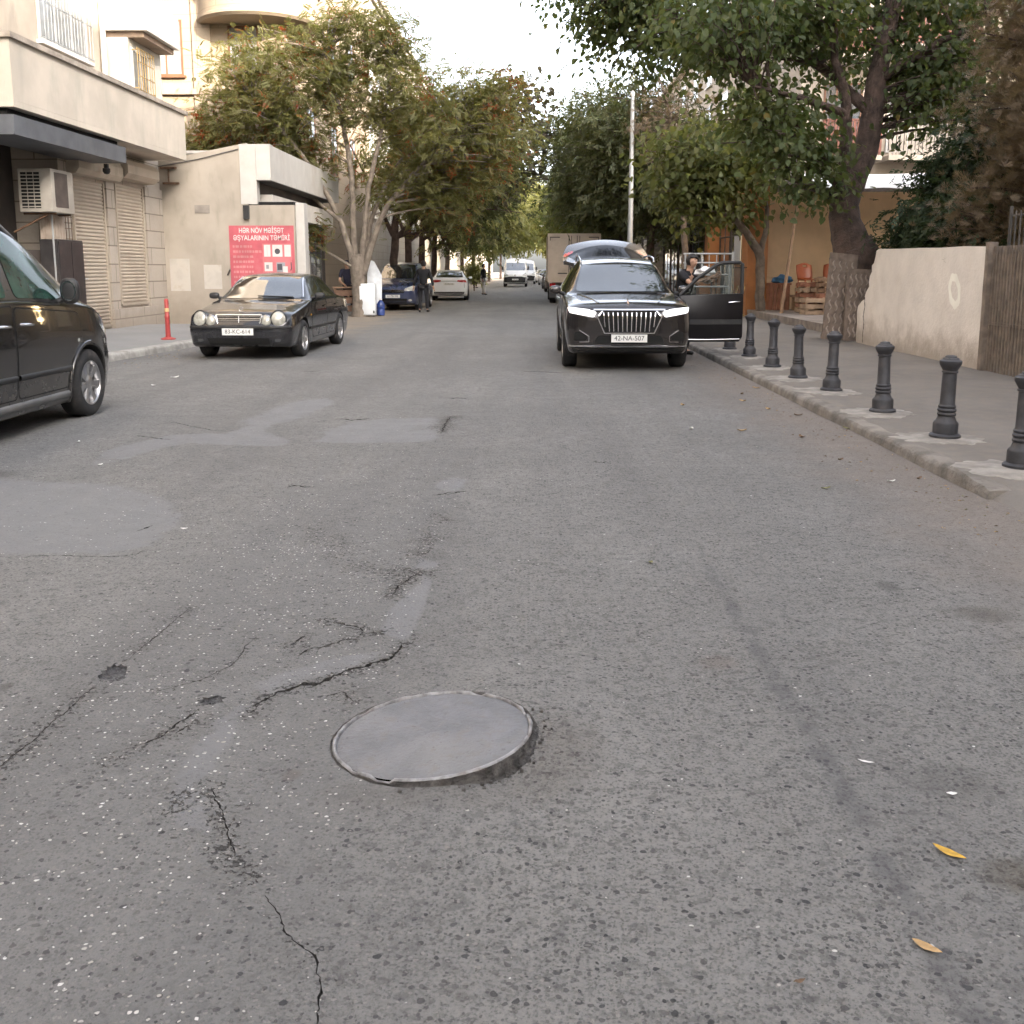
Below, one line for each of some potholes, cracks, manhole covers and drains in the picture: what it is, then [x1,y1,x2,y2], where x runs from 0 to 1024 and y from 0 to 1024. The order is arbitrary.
pothole [98,664,127,684]
crack [265,896,323,1024]
crack [138,711,196,746]
crack [211,789,235,857]
crack [155,573,419,713]
pothole [197,695,227,706]
manhole cover [330,690,553,793]
